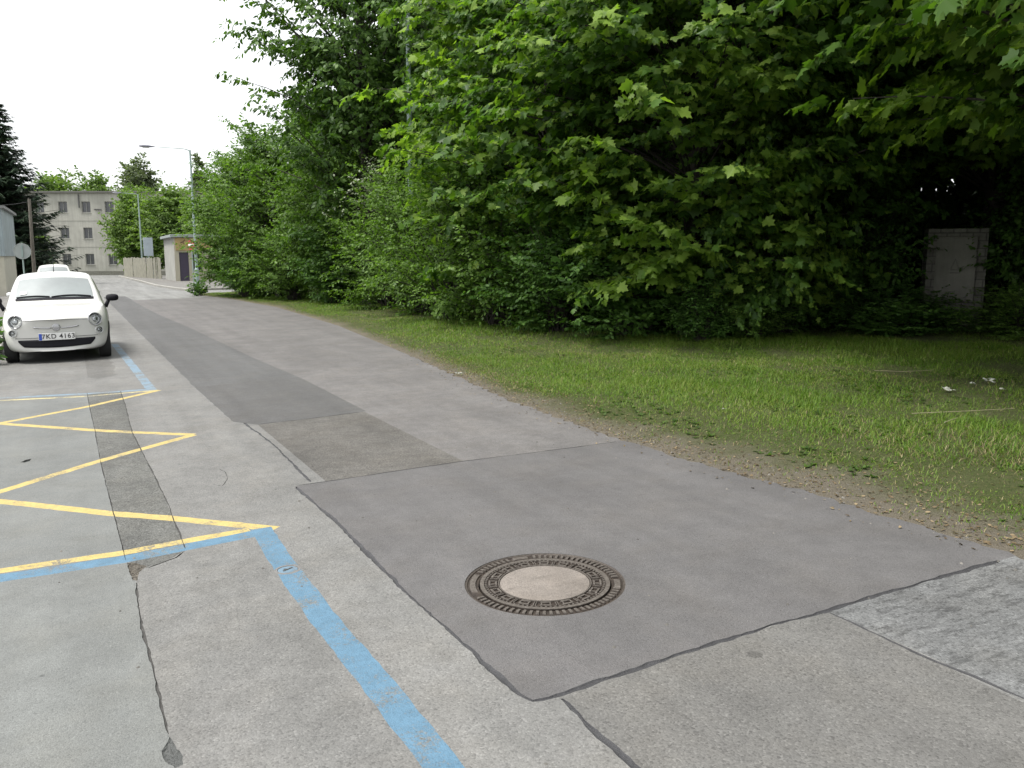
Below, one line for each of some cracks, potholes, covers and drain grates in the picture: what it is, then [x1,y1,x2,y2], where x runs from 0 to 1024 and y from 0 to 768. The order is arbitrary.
crack [120,391,185,734]
manhole cover [465,554,626,616]
